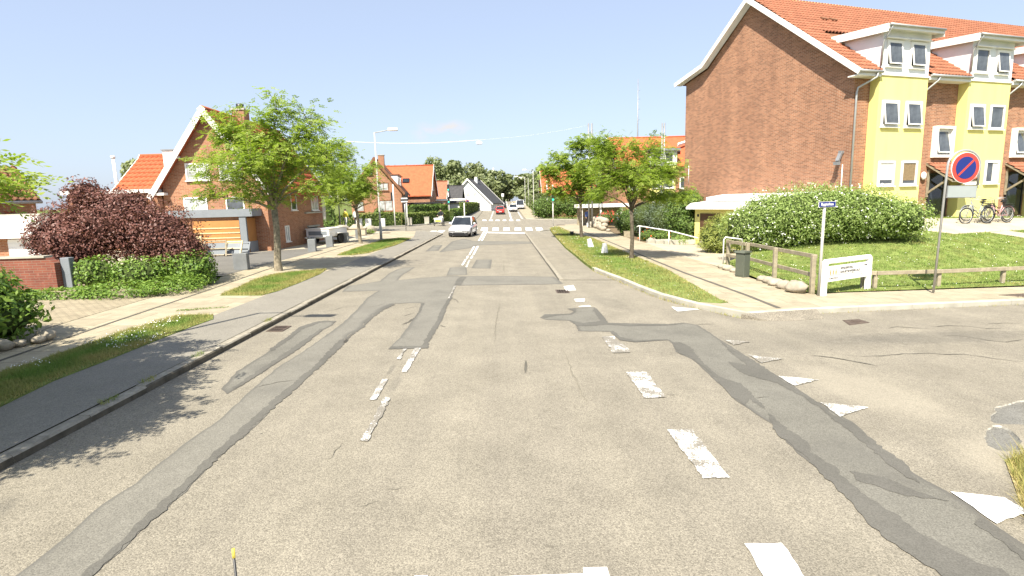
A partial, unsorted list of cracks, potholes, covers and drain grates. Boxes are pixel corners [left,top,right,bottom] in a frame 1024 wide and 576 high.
crack [815,323,1022,366]
